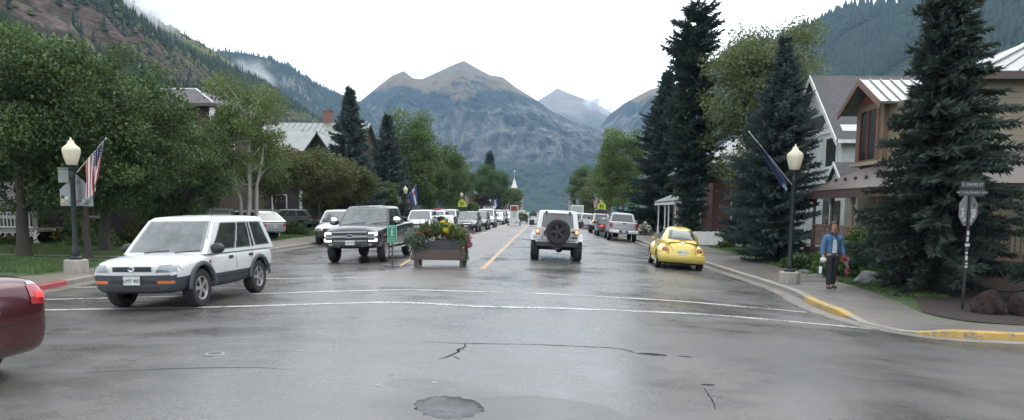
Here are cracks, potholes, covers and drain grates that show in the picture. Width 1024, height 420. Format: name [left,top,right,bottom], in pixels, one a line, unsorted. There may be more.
crack [437,342,635,359]
